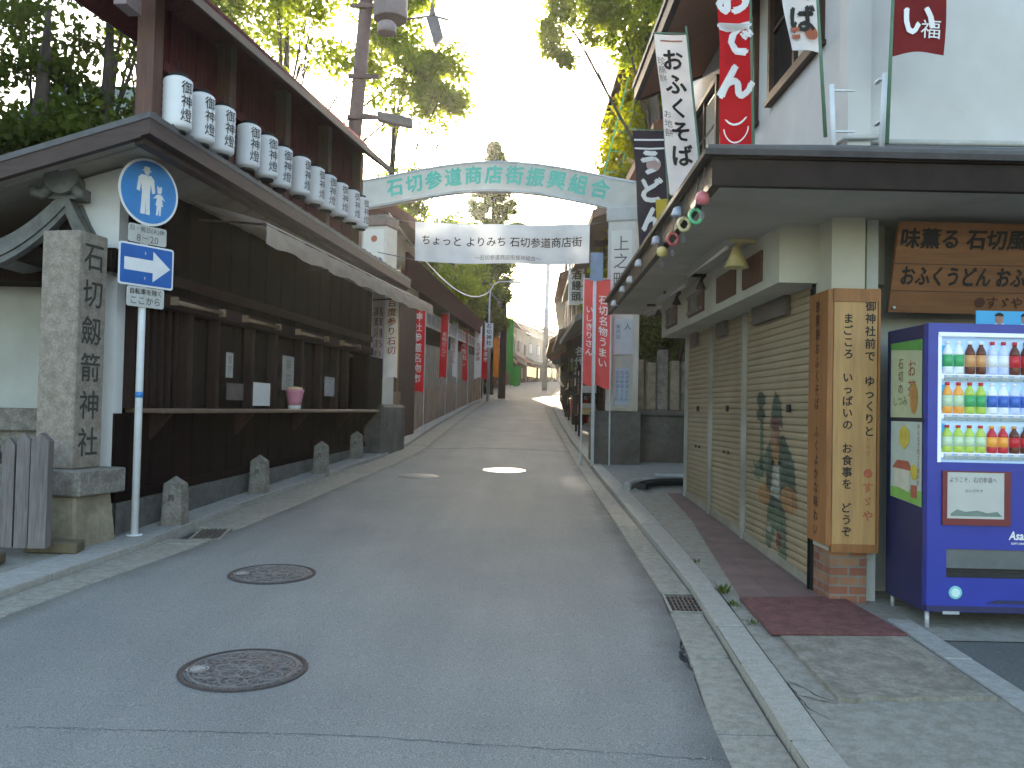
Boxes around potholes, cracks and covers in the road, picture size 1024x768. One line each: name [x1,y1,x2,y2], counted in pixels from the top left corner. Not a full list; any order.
crack [787,681,838,720]
drain grate [189,528,232,541]
pothole [679,643,693,672]
manhole cover [227,564,316,585]
manhole cover [176,648,308,693]
drain grate [661,593,704,616]
